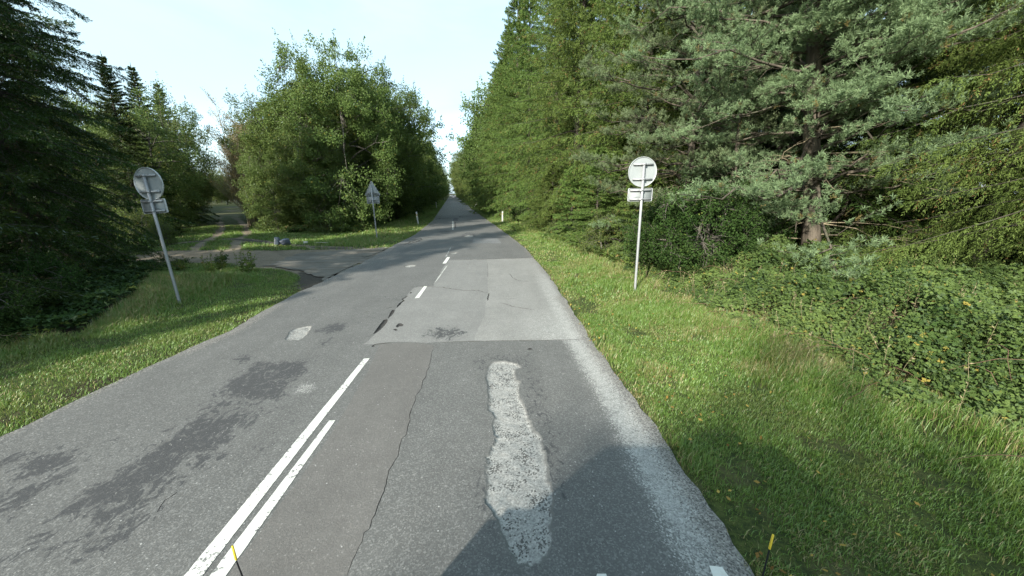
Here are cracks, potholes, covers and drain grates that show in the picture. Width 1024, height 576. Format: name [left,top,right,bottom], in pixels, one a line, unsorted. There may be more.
crack [347,339,586,574]
crack [387,286,532,310]
